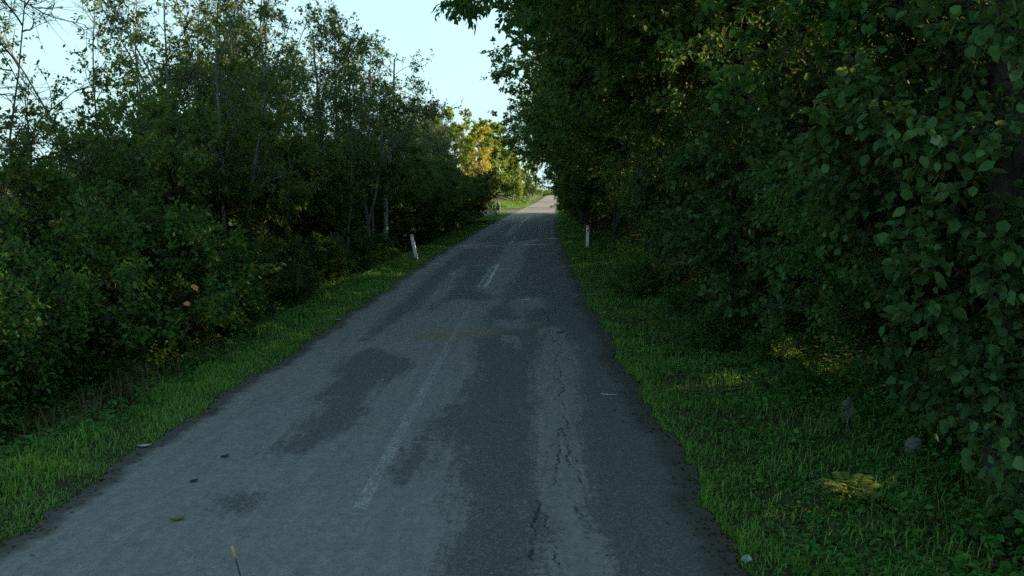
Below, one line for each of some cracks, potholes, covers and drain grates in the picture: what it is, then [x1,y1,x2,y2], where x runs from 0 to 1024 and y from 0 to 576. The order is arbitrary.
crack [526,309,597,567]
